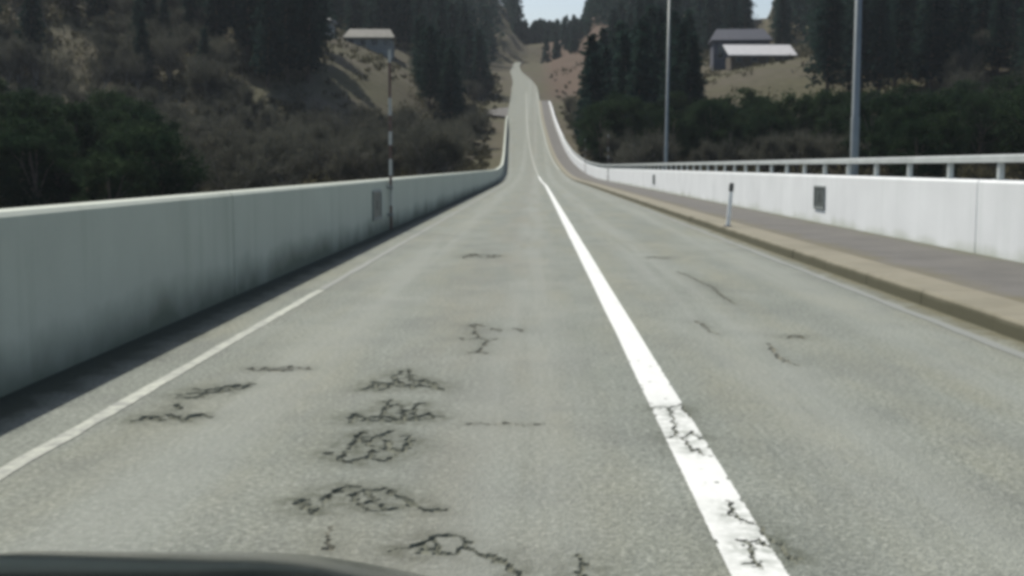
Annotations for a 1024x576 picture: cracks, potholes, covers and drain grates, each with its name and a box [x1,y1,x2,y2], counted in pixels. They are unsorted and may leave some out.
crack [727,502,804,569]
crack [766,335,807,366]
crack [646,256,735,304]
crack [385,533,523,576]
crack [291,484,449,551]
crack [458,324,524,354]
crack [572,553,591,576]
crack [128,365,312,423]
crack [321,369,446,464]
crack [650,404,704,456]
